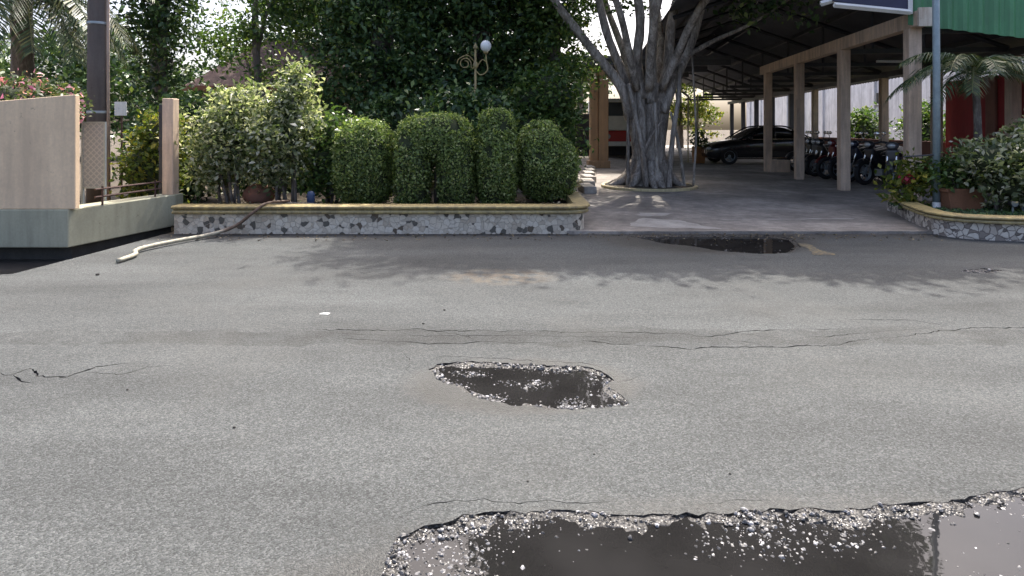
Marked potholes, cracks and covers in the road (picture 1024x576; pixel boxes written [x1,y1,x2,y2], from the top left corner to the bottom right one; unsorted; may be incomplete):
crack [1,363,168,383]
crack [320,319,1024,373]
crack [394,498,621,513]
pothole [429,360,629,410]
pothole [615,235,800,254]
pothole [382,487,1024,576]
